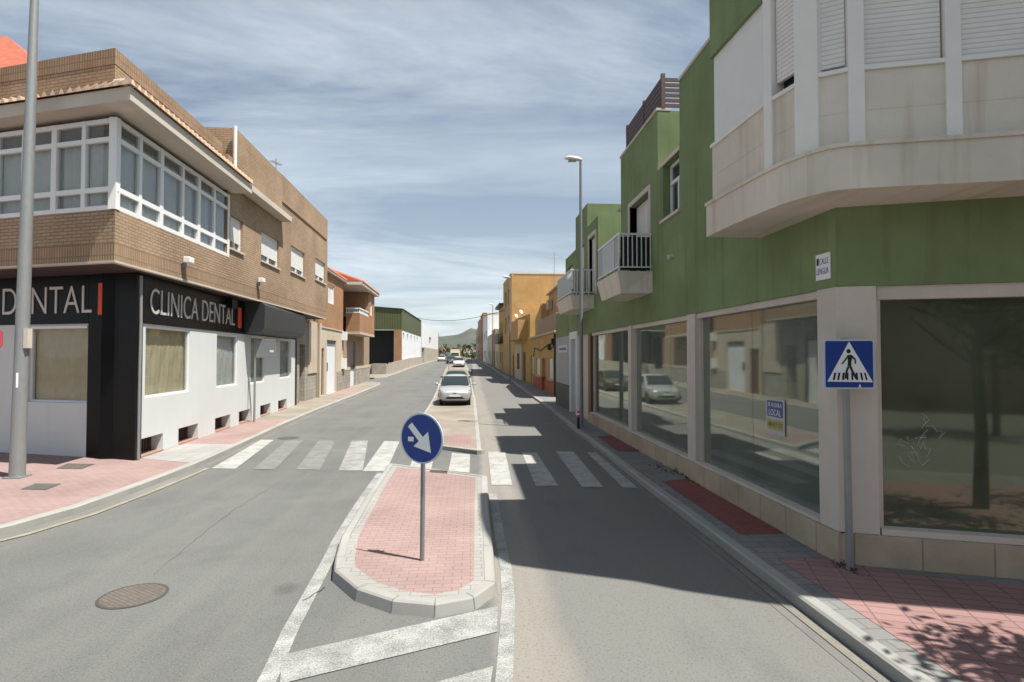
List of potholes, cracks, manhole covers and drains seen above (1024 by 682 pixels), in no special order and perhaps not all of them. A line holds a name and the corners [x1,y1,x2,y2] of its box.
manhole cover [95,583,169,609]
